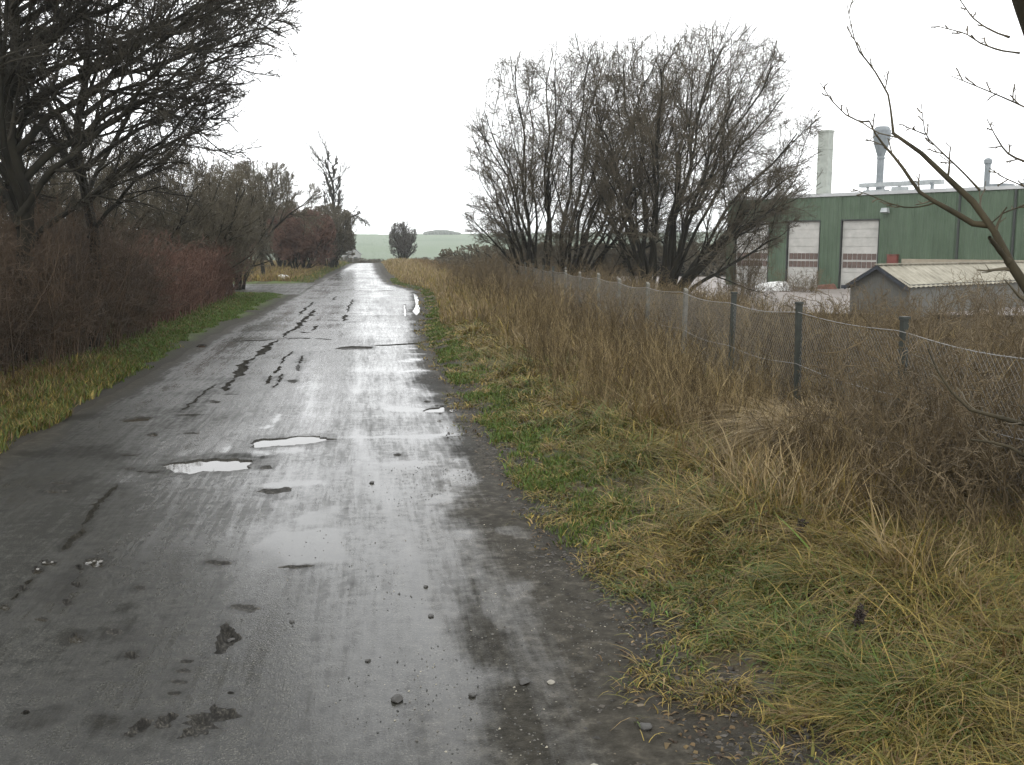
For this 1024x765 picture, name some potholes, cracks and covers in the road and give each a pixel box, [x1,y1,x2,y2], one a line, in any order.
crack [182,296,353,416]
crack [61,484,118,551]
pothole [229,604,261,613]
pothole [412,292,420,316]
pothole [154,712,180,729]
pothole [250,436,337,448]
pothole [176,704,242,739]
pothole [124,718,156,738]
pothole [214,621,242,654]
pothole [163,458,253,474]
